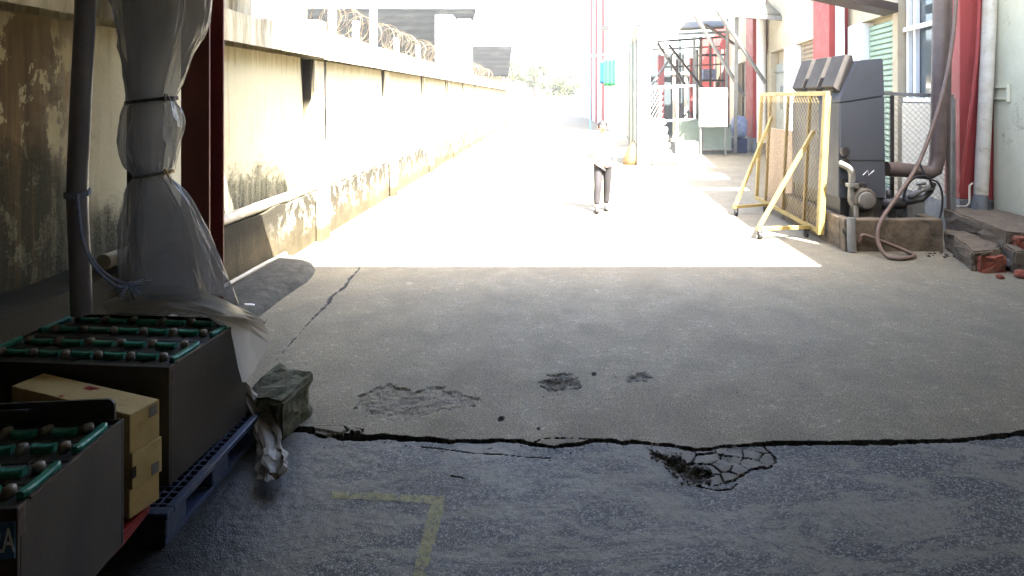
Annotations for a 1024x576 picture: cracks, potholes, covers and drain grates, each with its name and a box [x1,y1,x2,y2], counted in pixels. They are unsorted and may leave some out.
pothole [354,383,485,422]
crack [292,425,1024,492]
pothole [537,371,582,393]
crack [276,257,363,360]
pothole [651,452,715,483]
pothole [627,370,653,383]
